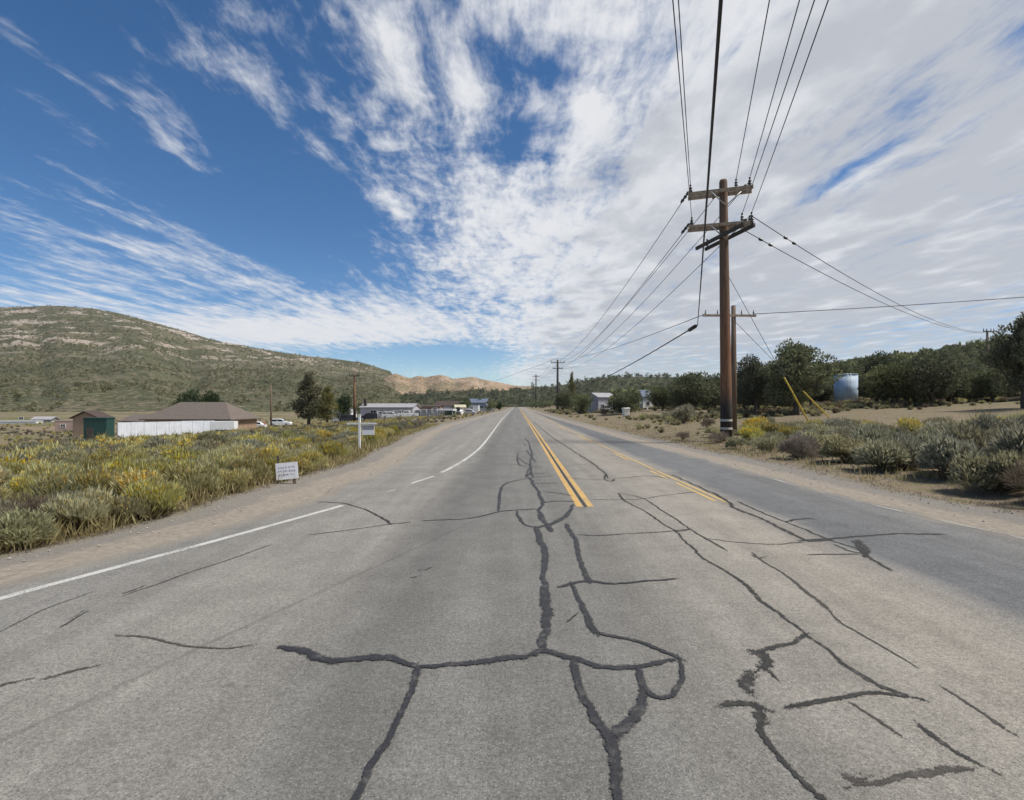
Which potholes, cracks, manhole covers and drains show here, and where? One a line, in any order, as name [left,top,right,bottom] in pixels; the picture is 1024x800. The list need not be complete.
crack [0,664,101,687]
crack [531,421,1019,800]
crack [116,634,261,649]
crack [0,593,89,632]
crack [119,544,272,597]
crack [309,501,408,535]
